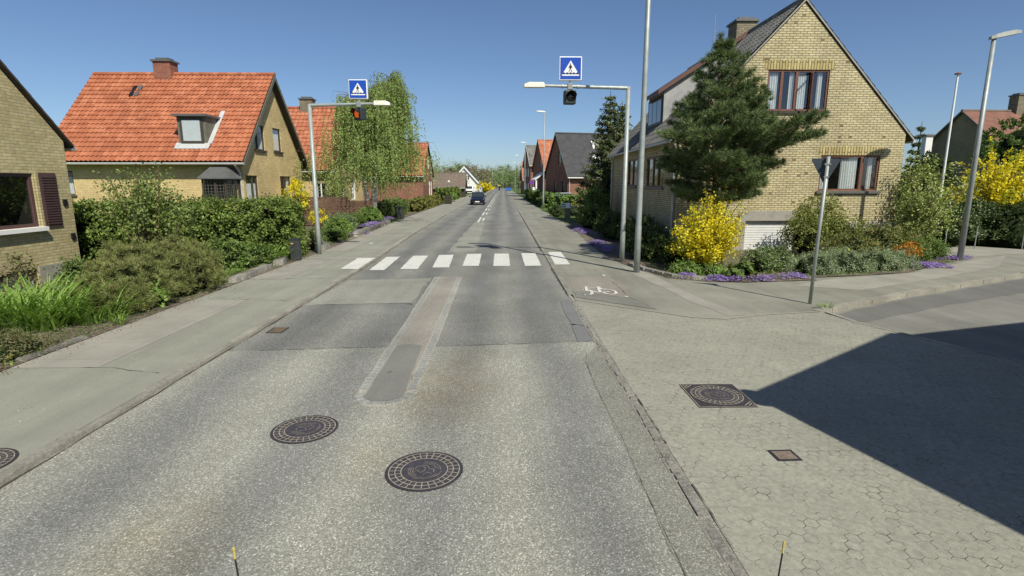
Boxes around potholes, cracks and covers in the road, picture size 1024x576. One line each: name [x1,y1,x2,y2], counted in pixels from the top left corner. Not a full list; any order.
manhole cover [385,451,463,492]
manhole cover [679,384,758,408]
manhole cover [0,448,19,468]
utility cover [767,449,803,461]
manhole cover [270,415,339,444]
